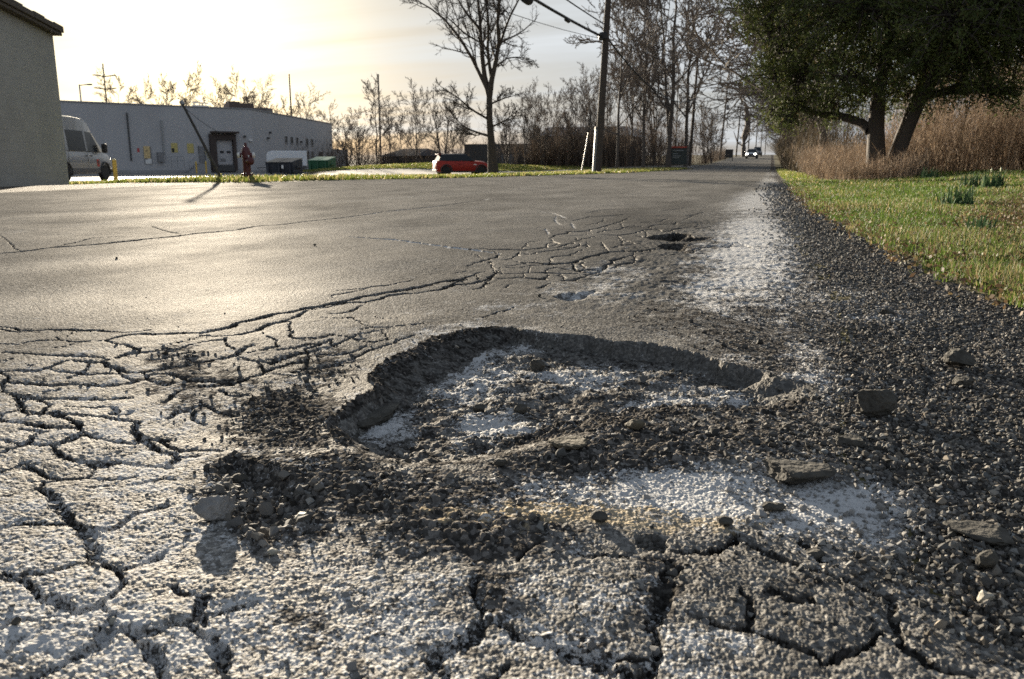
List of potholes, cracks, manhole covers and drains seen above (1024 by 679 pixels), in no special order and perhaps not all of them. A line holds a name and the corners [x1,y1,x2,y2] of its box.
pothole [648,232,715,253]
pothole [324,325,826,469]
pothole [633,533,671,554]
pothole [552,288,607,302]
crack [424,530,977,679]
crack [0,200,753,679]
